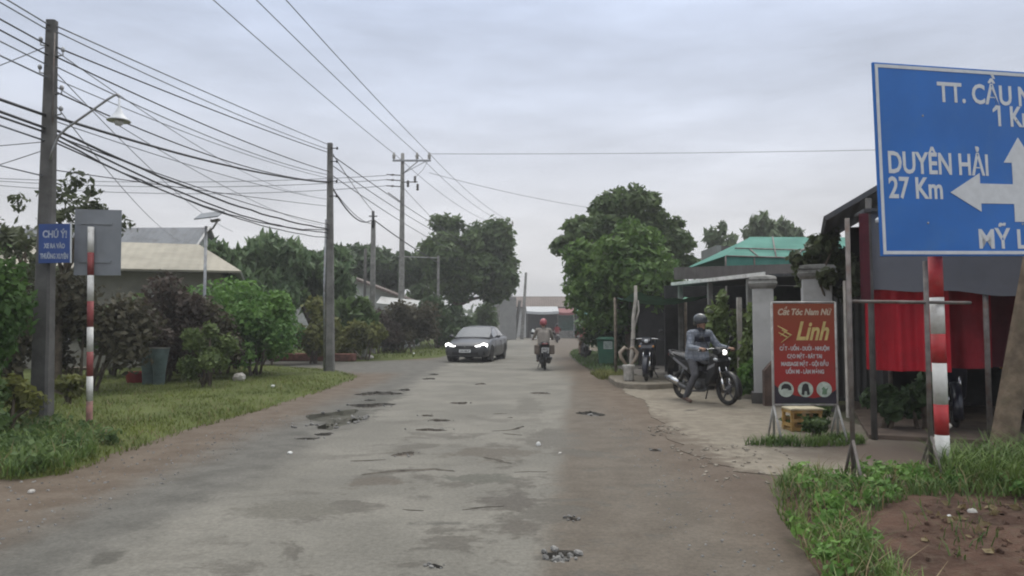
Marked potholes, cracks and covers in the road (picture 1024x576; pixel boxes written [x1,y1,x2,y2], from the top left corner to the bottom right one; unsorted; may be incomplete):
crack [354,459,454,475]
pothole [291,409,370,430]
pothole [541,545,583,563]
